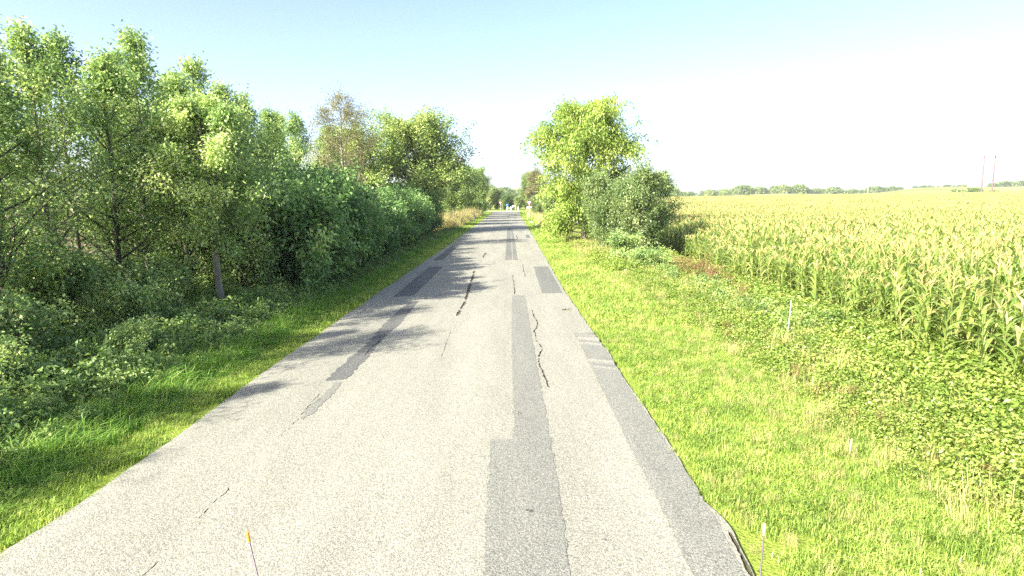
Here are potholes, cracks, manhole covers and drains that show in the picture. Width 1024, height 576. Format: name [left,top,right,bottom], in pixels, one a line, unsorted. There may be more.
crack [442,253,487,355]
crack [512,266,550,388]
